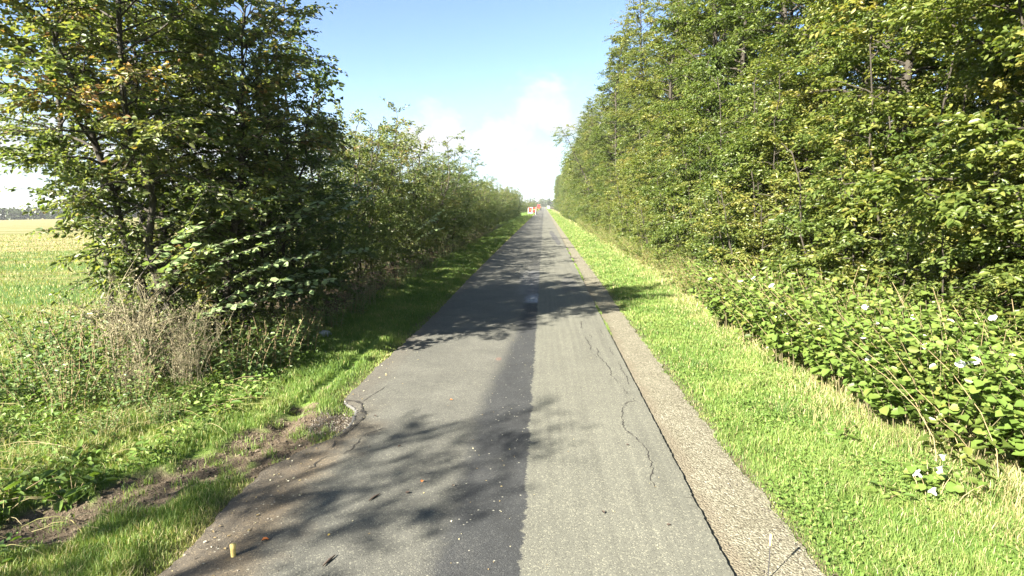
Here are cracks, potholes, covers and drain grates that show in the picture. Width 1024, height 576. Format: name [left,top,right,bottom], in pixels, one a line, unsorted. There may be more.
crack [580,321,655,487]
crack [305,386,386,471]
